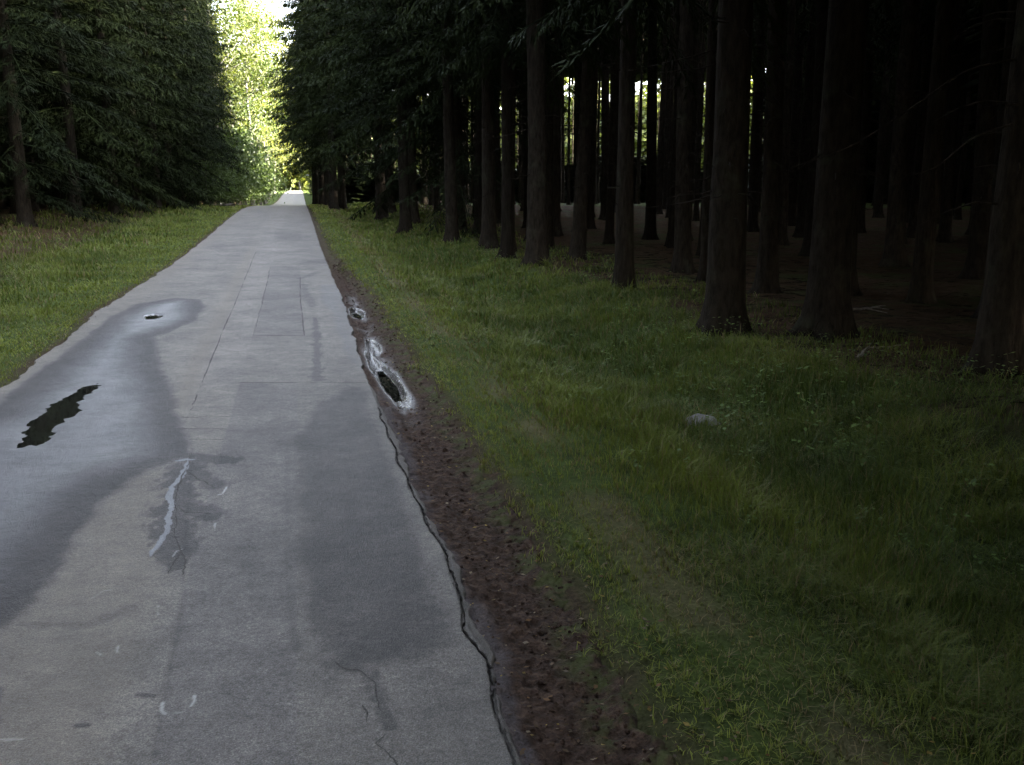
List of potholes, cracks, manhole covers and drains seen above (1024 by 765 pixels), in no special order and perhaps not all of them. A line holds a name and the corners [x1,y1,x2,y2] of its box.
crack [378,407,516,765]
pothole [348,307,365,320]
crack [335,662,398,765]
pothole [364,349,413,410]
crack [168,457,215,574]
